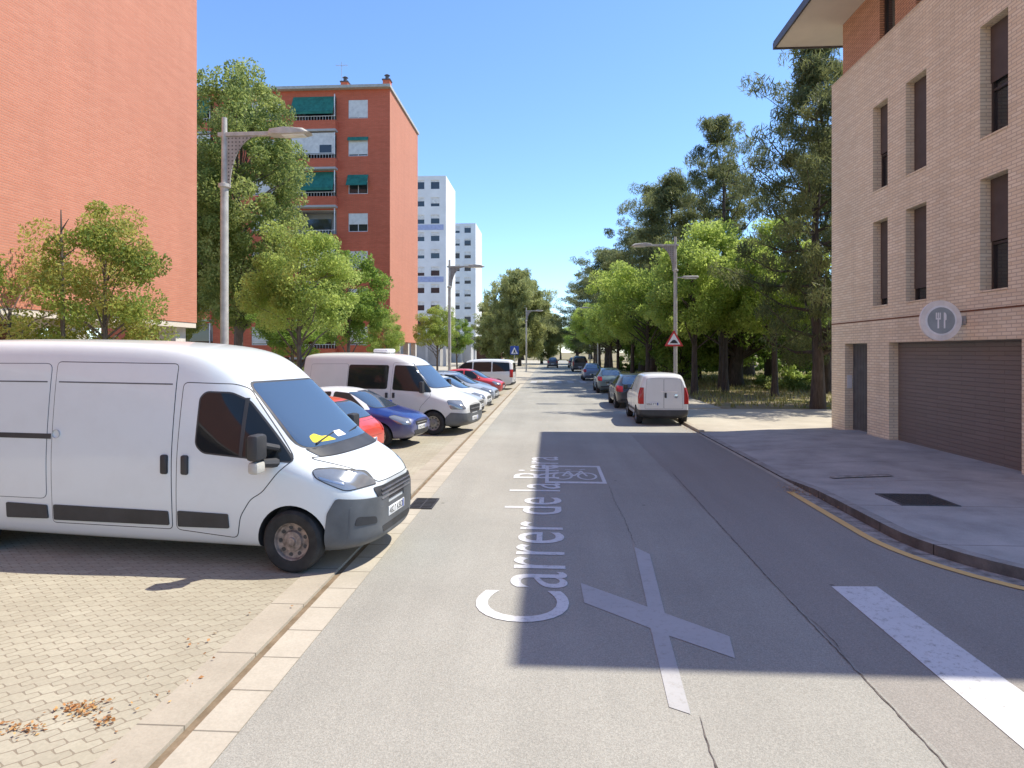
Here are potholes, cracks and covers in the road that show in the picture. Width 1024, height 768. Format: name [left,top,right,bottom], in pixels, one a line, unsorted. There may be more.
drain grate [410,498,439,509]
utility cover [875,493,962,507]
crack [673,474,948,768]
